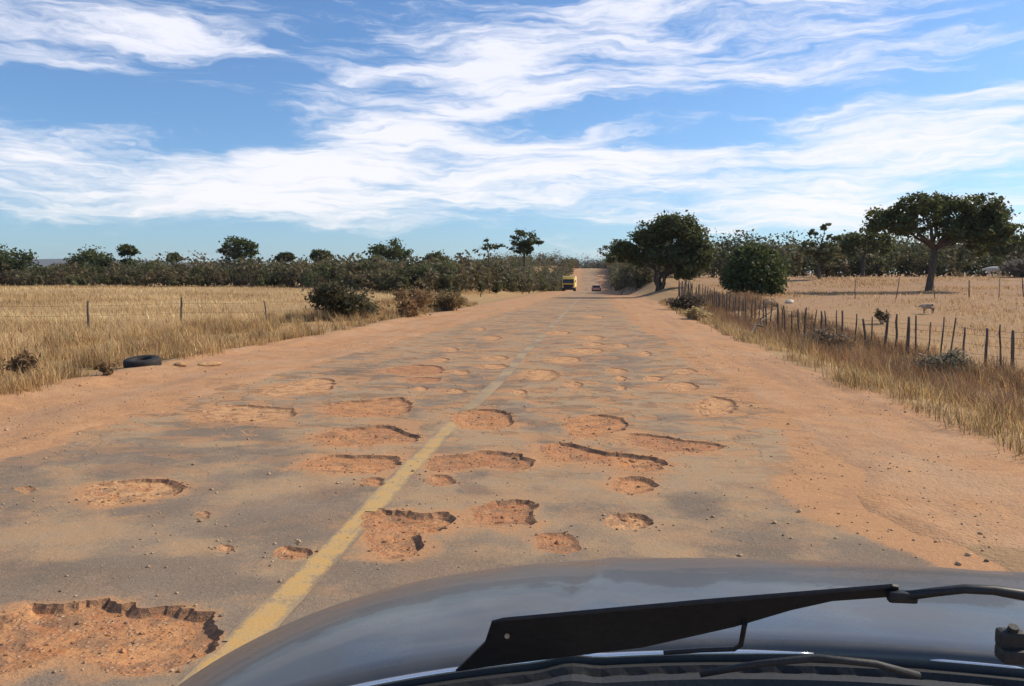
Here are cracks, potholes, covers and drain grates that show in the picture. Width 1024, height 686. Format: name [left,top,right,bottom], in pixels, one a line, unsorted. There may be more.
pothole [450,409,520,429]
pothole [540,441,674,472]
pothole [427,450,536,472]
pothole [627,433,730,453]
pothole [535,531,582,554]
pothole [322,397,414,417]
pothole [562,414,629,437]
pothole [358,509,460,561]
pothole [199,404,299,423]
pothole [600,512,658,531]
pothole [472,499,540,527]
pothole [82,478,192,507]
